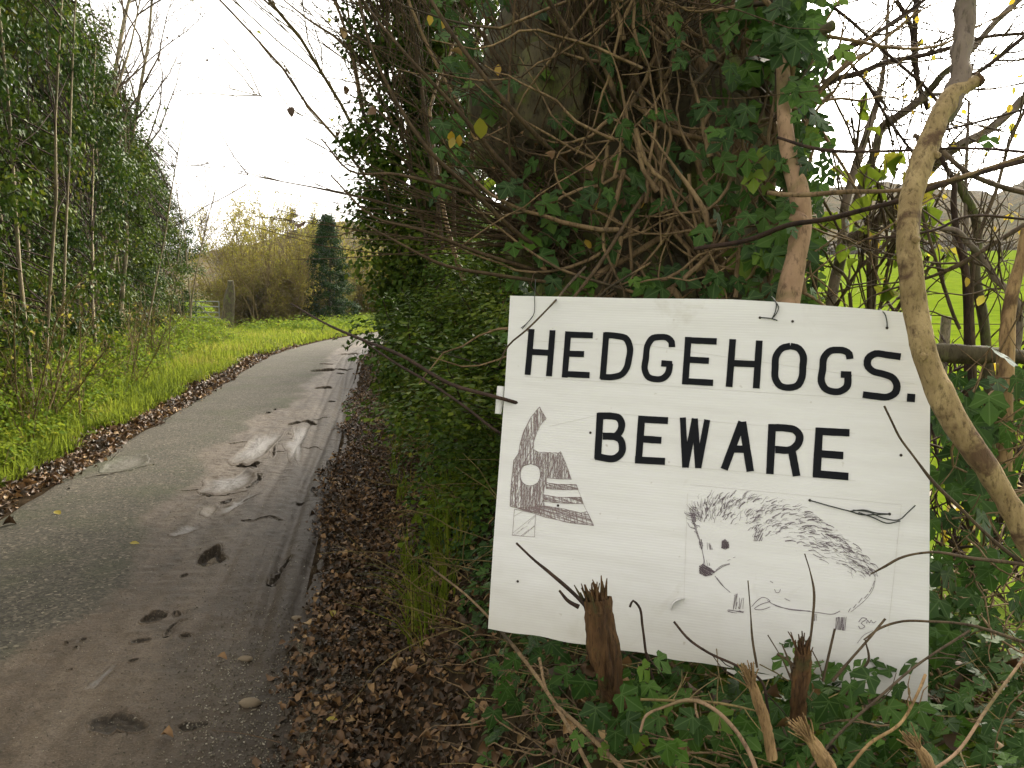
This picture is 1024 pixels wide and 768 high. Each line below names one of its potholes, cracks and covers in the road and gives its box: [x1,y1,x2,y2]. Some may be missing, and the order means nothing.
pothole [137,609,170,625]
crack [267,556,293,587]
pothole [85,711,152,736]
pothole [195,543,228,567]
